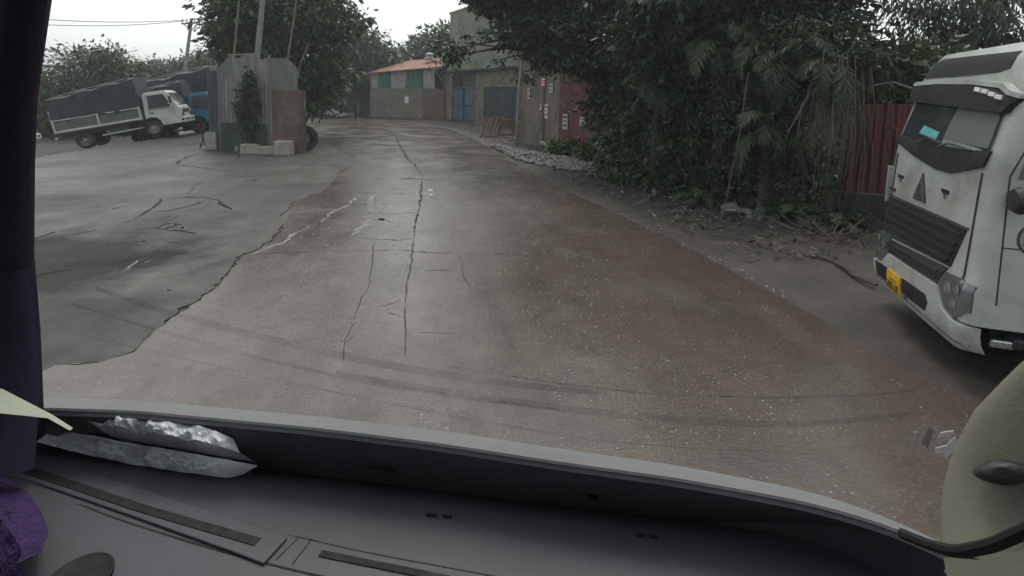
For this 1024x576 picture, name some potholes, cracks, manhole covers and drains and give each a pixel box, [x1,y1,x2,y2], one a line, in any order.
crack [57,132,474,365]
